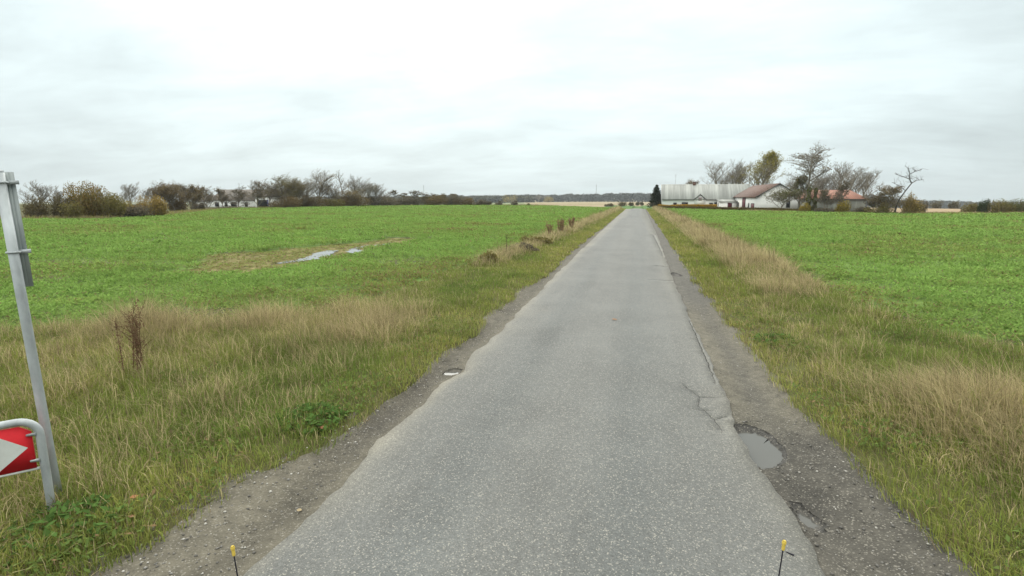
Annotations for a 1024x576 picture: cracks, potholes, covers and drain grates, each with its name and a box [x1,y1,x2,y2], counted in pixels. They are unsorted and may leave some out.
pothole [733,423,788,470]
crack [686,320,728,431]
pothole [789,500,828,533]
